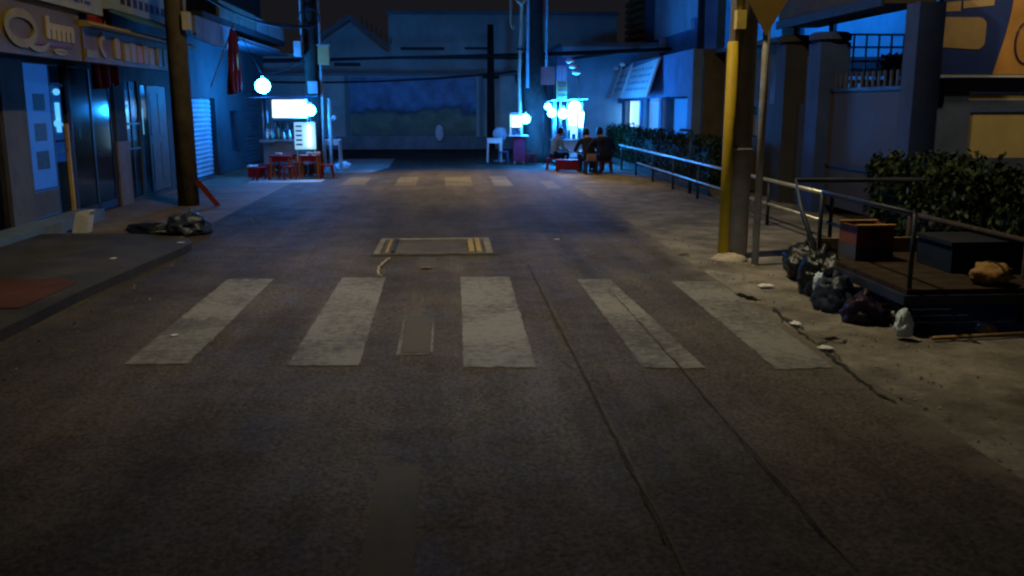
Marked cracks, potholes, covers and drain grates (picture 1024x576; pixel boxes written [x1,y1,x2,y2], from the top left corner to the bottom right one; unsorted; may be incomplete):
manhole cover [372,237,499,256]
crack [528,264,864,576]
